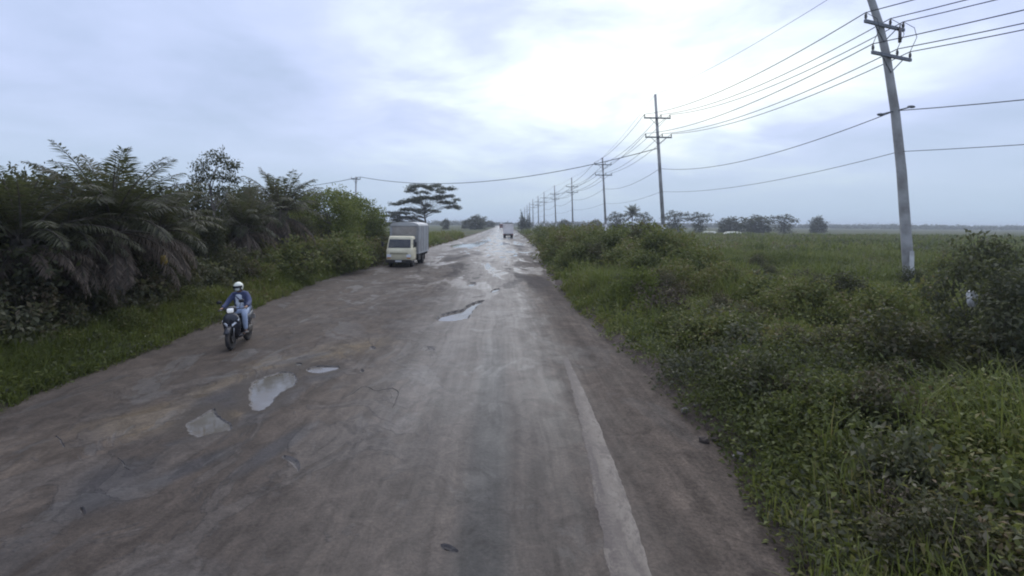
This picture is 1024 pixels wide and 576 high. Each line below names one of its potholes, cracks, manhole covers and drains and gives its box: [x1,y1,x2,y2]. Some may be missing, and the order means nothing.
pothole [306,365,340,373]
pothole [435,300,485,321]
crack [346,386,399,409]
pothole [185,408,233,437]
pothole [281,455,300,471]
pothole [248,371,298,411]
